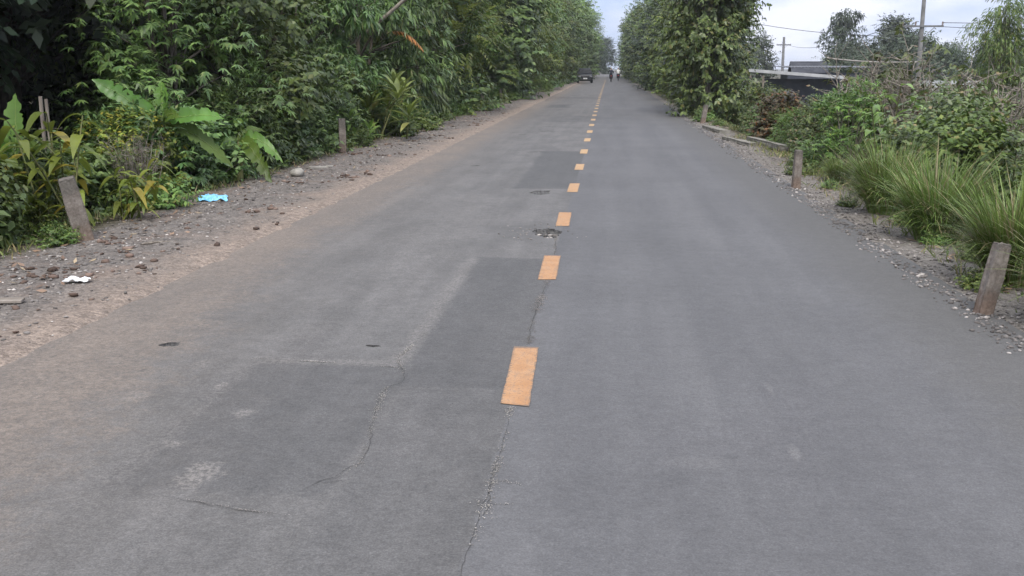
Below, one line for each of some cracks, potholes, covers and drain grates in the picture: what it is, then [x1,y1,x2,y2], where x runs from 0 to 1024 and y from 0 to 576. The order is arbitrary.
crack [254,343,414,490]
crack [162,495,286,515]
